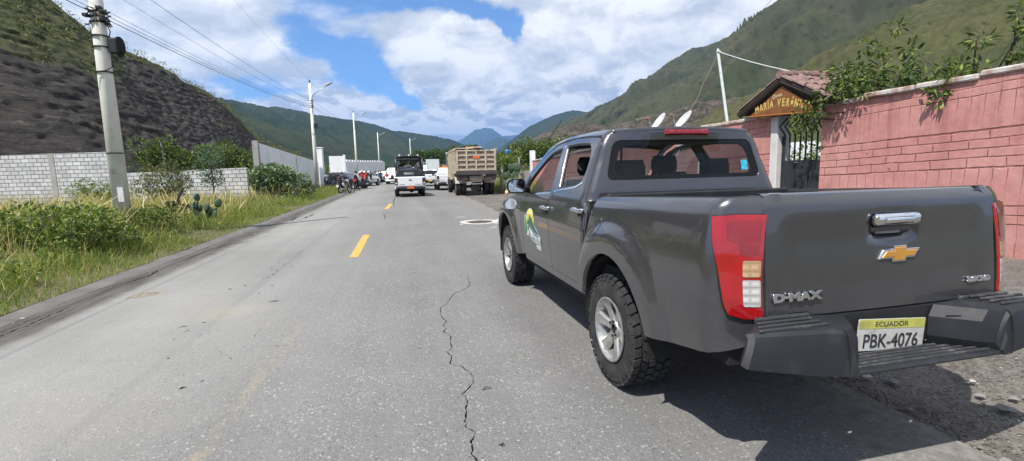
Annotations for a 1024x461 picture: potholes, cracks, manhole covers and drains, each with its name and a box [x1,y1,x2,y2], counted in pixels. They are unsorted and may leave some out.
crack [440,278,478,461]
